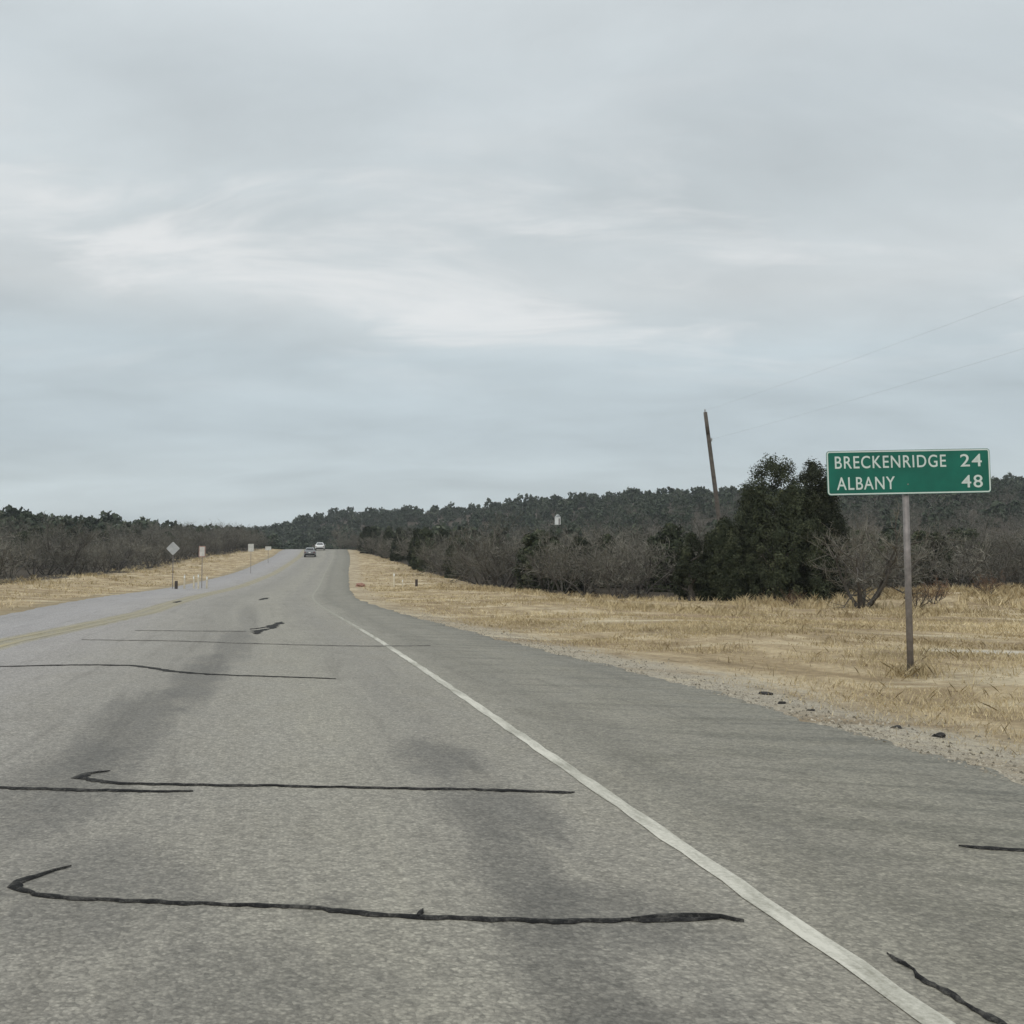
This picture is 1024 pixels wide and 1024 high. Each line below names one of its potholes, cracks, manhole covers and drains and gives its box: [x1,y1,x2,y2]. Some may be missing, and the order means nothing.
crack [887,952,1007,1024]
